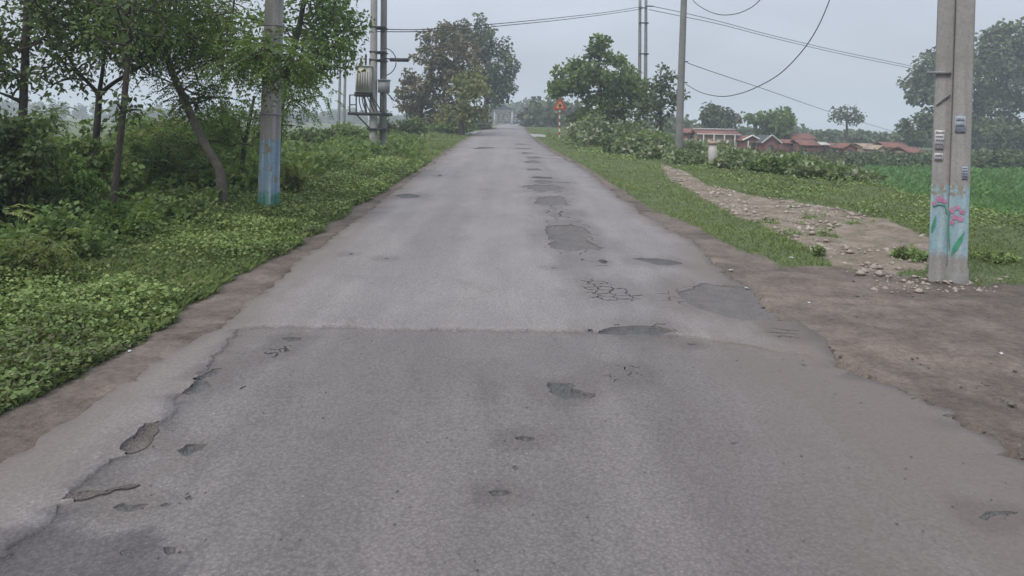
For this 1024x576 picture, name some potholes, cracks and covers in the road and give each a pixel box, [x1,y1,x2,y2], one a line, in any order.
pothole [178,444,207,457]
pothole [119,421,160,454]
crack [264,345,290,357]
pothole [62,484,140,502]
pothole [979,511,1018,520]
crack [580,259,641,301]
pothole [184,368,223,395]
